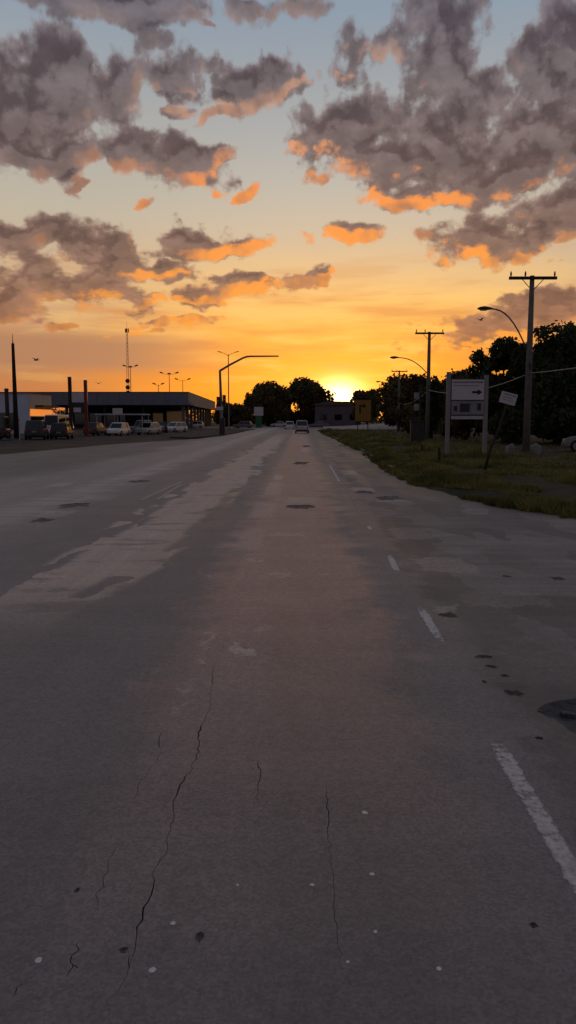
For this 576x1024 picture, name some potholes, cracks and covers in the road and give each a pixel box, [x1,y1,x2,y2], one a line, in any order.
crack [108,658,214,1021]
crack [326,790,343,975]
pothole [537,698,576,733]
